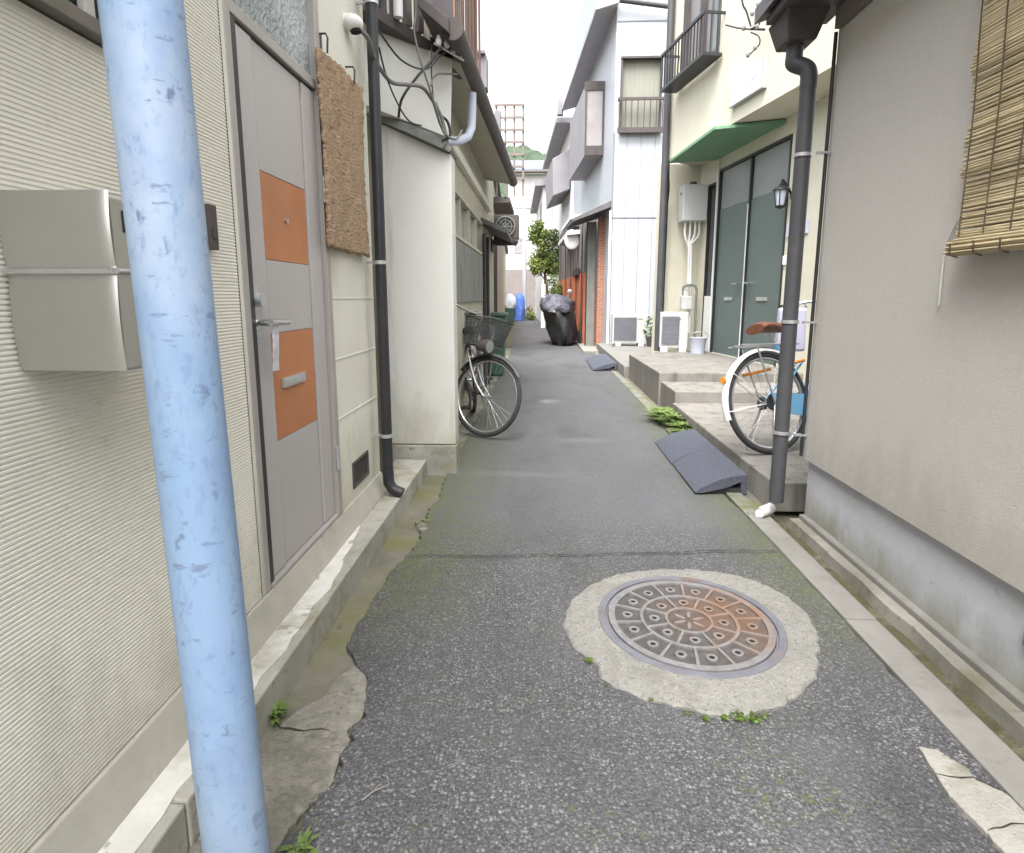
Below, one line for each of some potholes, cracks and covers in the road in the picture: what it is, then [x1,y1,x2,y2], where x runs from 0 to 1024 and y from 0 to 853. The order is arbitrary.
manhole cover [598,576,788,679]
crack [274,722,331,731]
crack [936,773,1005,792]
crack [987,823,1024,831]
